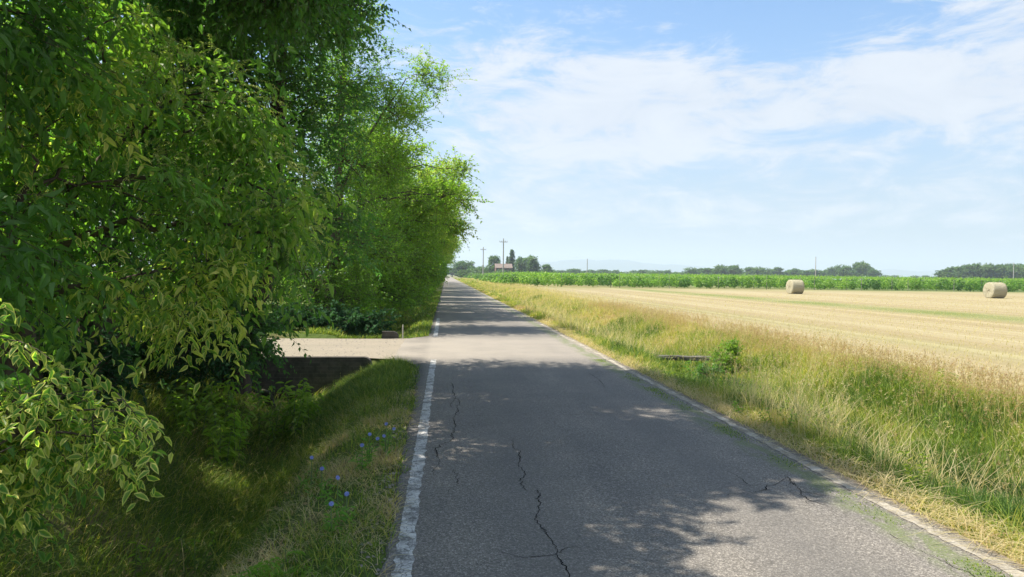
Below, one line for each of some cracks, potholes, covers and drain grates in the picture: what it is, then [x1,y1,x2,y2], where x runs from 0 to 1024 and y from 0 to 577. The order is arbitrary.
crack [490,440,583,577]
crack [433,384,461,492]
crack [737,475,825,505]
